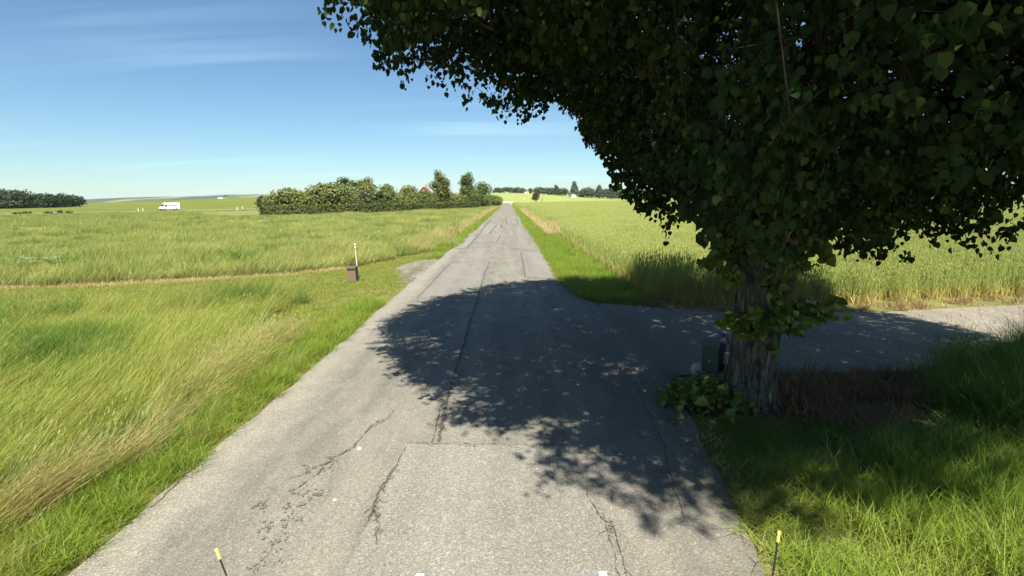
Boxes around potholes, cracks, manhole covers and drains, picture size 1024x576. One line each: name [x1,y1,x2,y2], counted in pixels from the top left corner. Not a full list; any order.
crack [587,490,632,576]
crack [237,375,394,572]
